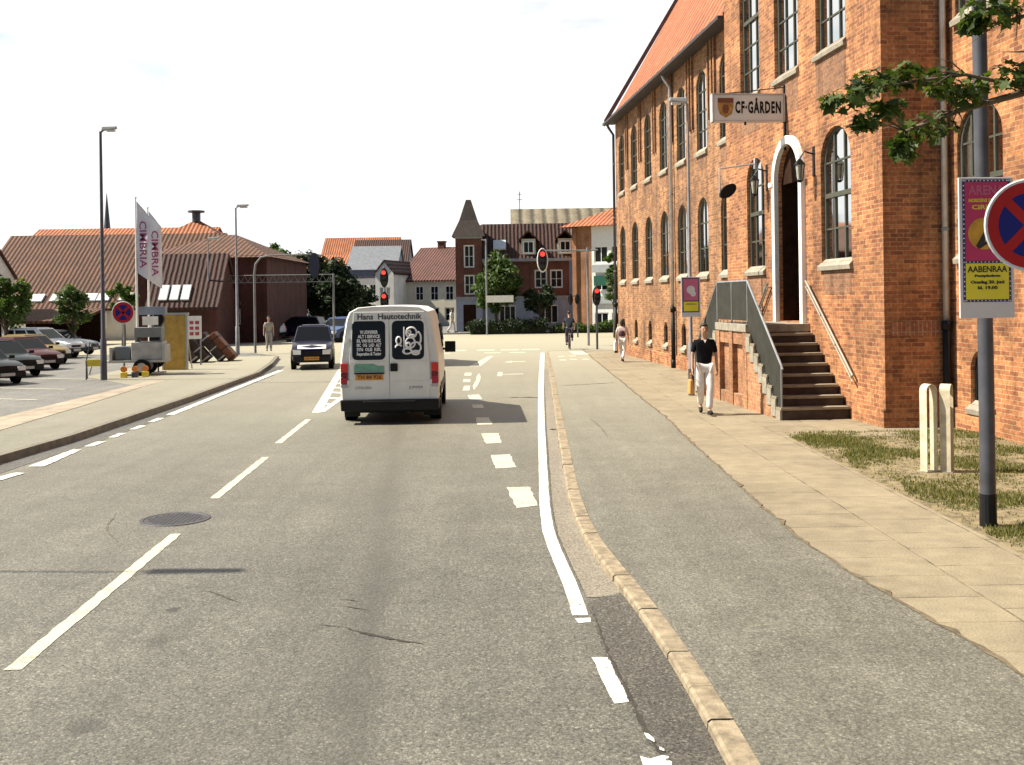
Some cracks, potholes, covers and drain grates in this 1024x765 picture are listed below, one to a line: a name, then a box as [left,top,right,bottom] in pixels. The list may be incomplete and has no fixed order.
crack [319,624,422,644]
manhole cover [139,512,211,527]
